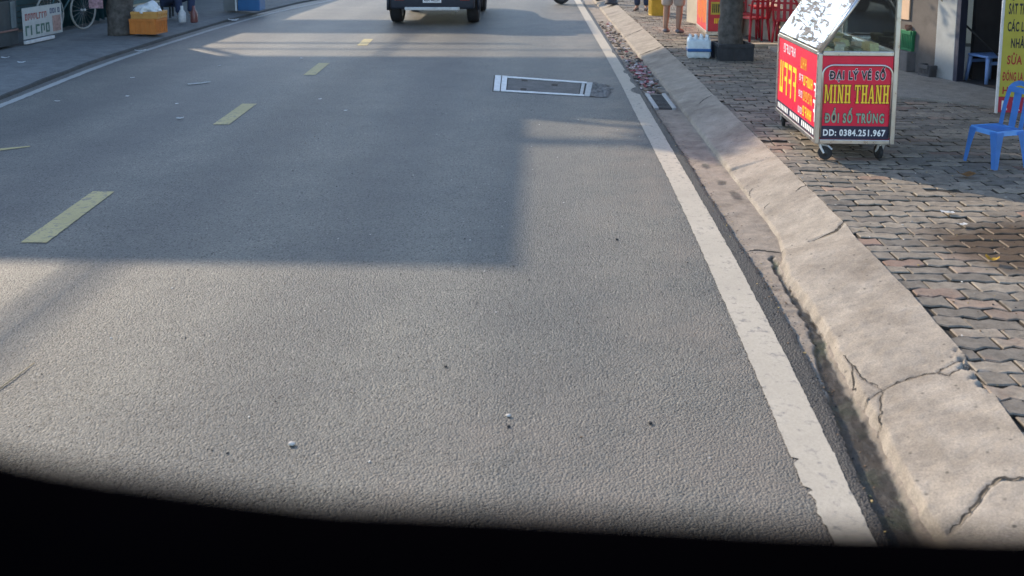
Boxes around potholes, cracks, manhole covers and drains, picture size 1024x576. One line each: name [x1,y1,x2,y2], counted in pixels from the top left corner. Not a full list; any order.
drain grate [645,93,677,110]
manhole cover [492,75,593,97]
crack [950,476,1024,529]
